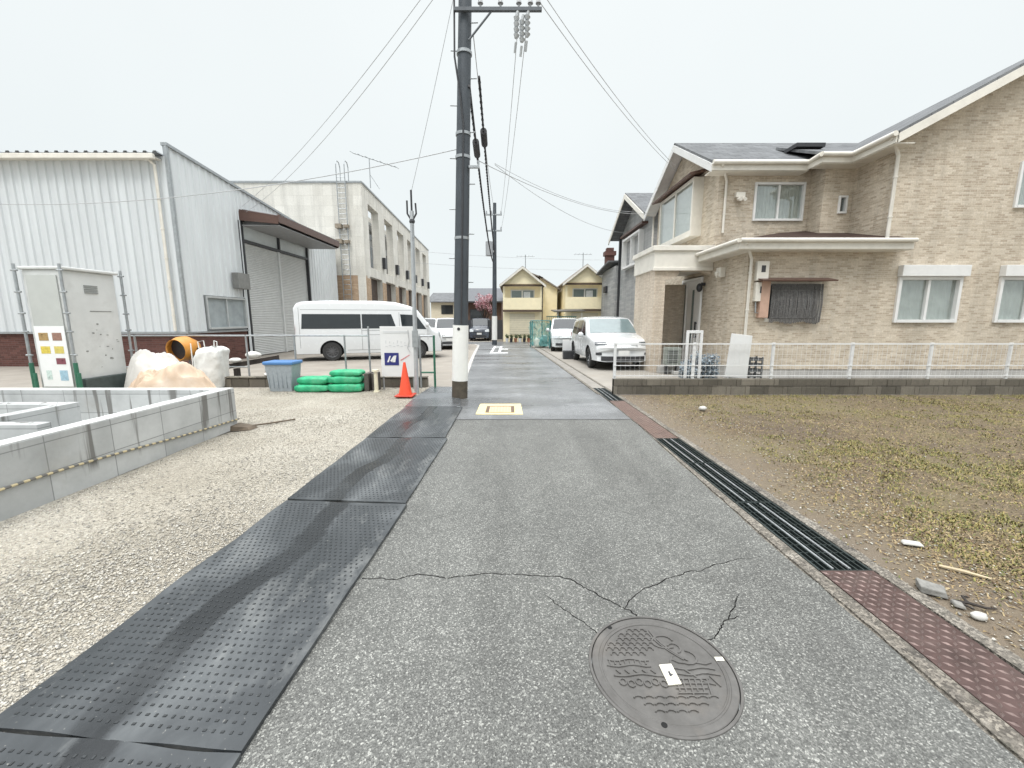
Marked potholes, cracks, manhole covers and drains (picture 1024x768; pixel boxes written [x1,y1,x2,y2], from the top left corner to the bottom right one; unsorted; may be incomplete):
drain grate [656,438,714,463]
drain grate [686,463,772,503]
drain grate [735,502,873,572]
crack [362,557,756,633]
manhole cover [588,616,745,741]
manhole cover [476,404,523,414]
